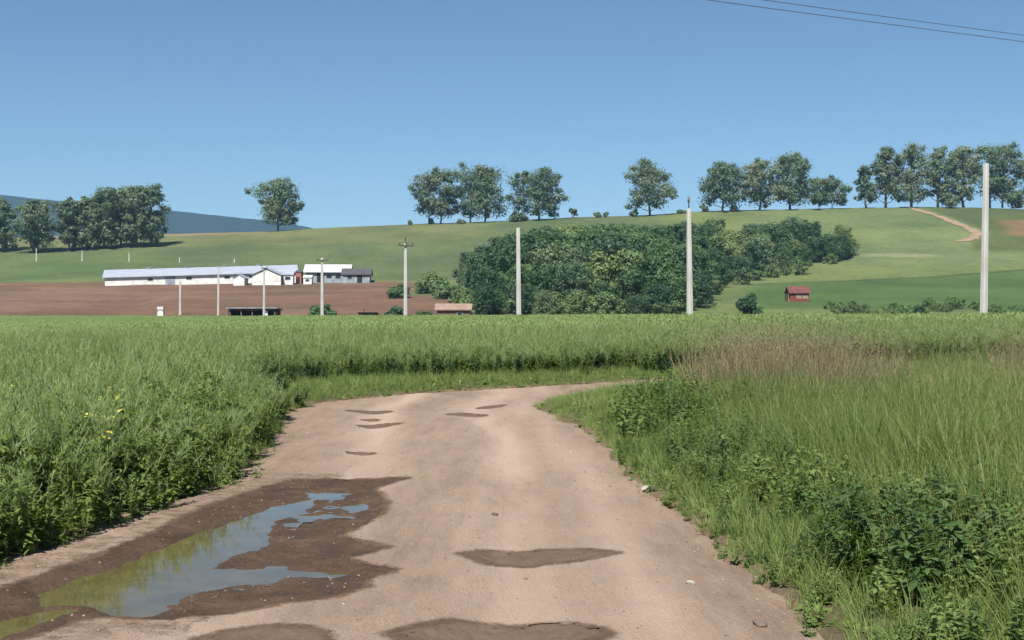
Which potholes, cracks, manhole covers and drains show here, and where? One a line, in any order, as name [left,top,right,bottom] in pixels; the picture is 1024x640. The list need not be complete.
pothole [0,477,410,640]
pothole [387,623,605,640]
pothole [463,549,606,567]
